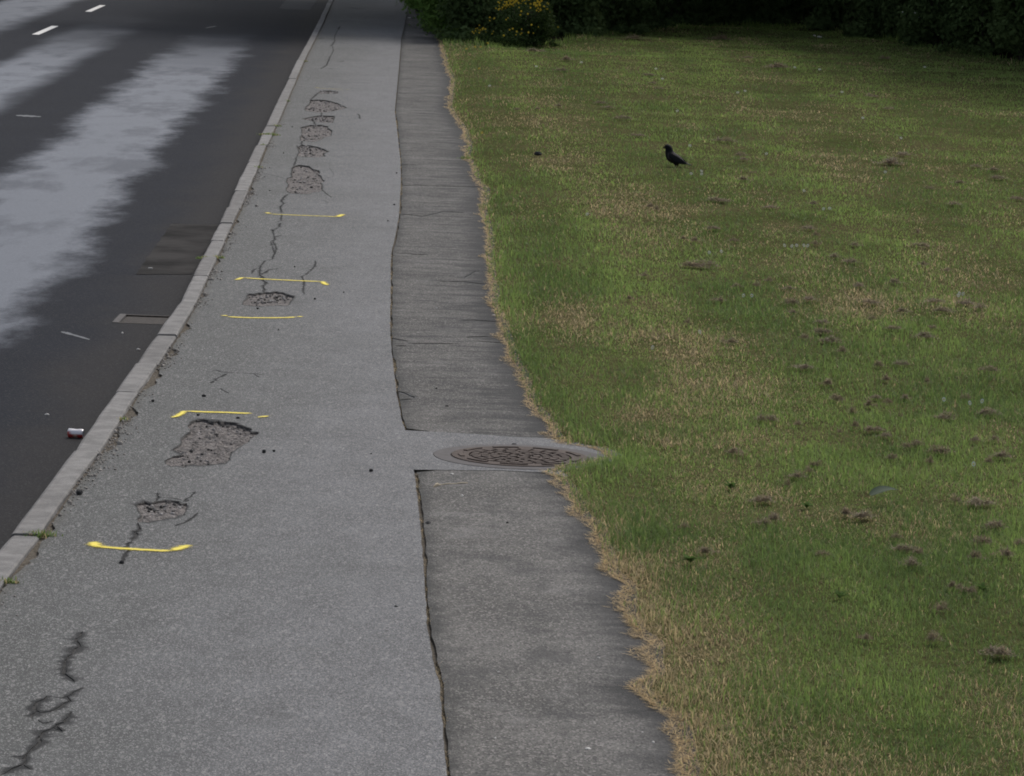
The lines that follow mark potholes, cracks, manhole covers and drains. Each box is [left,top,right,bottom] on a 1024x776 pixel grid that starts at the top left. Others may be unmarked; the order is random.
crack [252,93,322,292]
pothole [299,125,332,142]
pothole [297,145,328,158]
pothole [243,292,294,306]
crack [123,523,141,561]
drain grate [112,314,169,325]
pothole [165,419,258,467]
pothole [135,500,187,522]
pothole [305,100,346,113]
manhole cover [434,444,605,473]
crack [0,631,86,775]
pothole [286,165,324,194]
